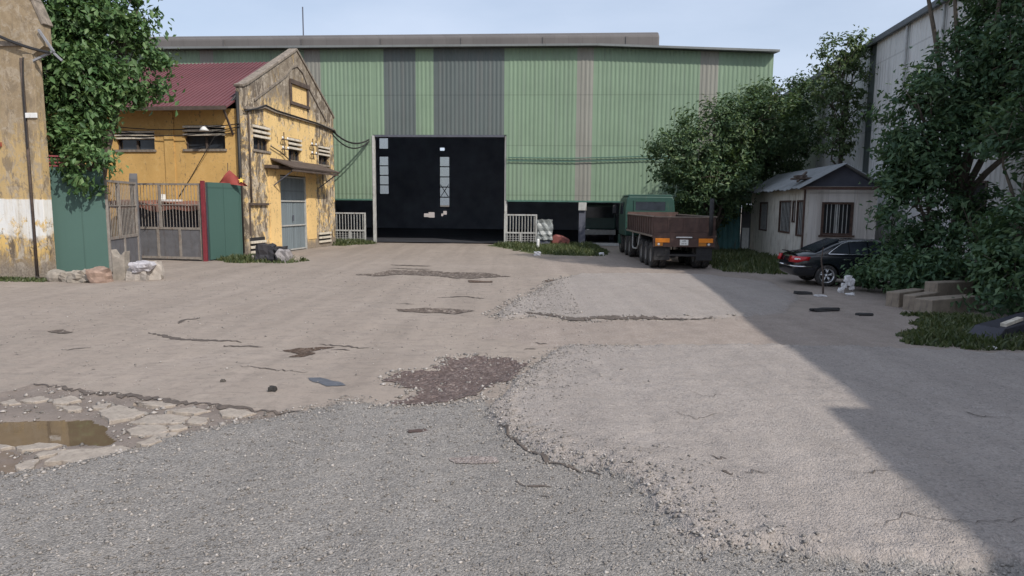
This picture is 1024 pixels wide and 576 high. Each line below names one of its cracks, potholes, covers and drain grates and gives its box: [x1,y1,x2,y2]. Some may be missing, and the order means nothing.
pothole [356,270,510,279]
pothole [383,355,528,405]
crack [148,318,259,347]
crack [868,512,1023,526]
pothole [283,347,333,357]
crack [499,424,602,497]
